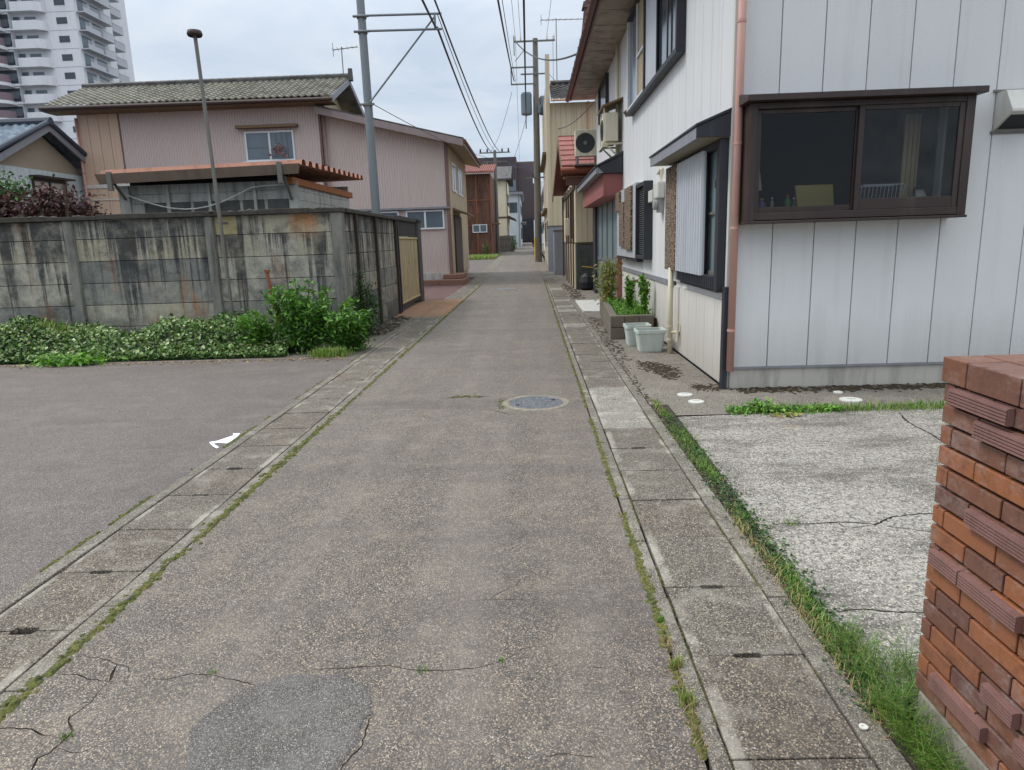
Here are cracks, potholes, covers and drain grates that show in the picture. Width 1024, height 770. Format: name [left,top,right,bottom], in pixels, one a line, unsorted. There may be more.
manhole cover [502,395,570,411]
crack [311,645,547,671]
crack [340,711,378,770]
crack [774,513,933,532]
crack [899,412,940,440]
crack [148,672,255,685]
crack [0,656,131,770]
